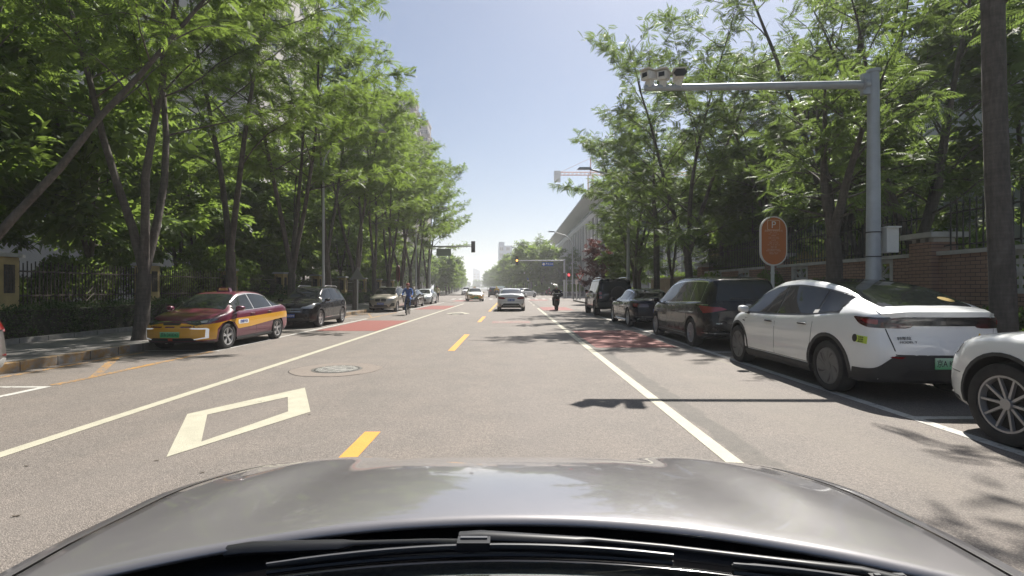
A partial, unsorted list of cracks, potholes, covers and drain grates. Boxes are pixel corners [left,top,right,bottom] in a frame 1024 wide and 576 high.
manhole cover [288,363,383,377]
